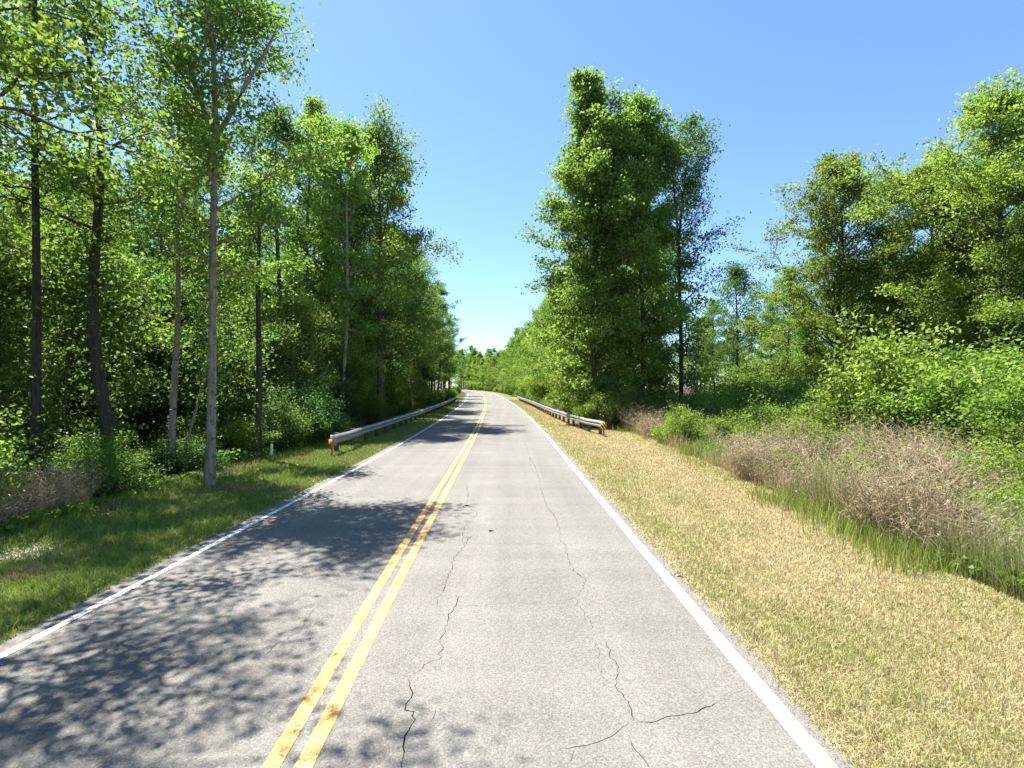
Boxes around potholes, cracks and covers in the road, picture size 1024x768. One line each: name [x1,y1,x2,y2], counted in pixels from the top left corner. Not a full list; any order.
crack [476,444,742,768]
crack [395,491,478,768]
